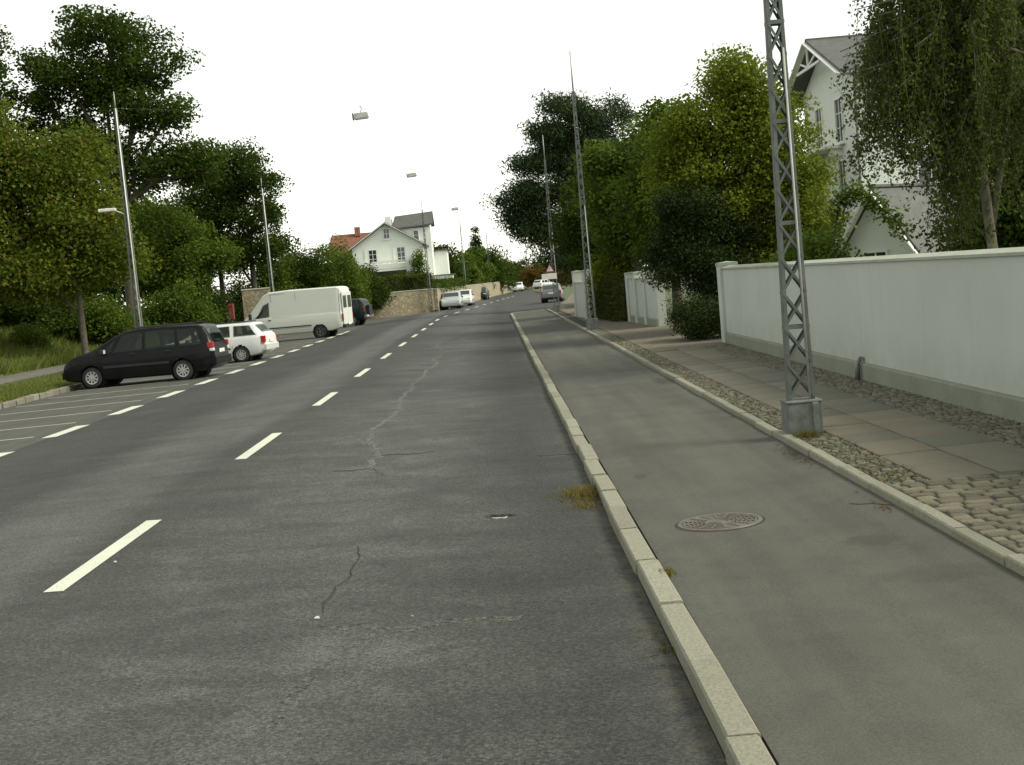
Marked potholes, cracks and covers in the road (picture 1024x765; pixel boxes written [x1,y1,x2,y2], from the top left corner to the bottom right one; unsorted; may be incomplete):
manhole cover [675,512,766,532]
crack [254,546,531,738]
crack [347,337,562,476]
